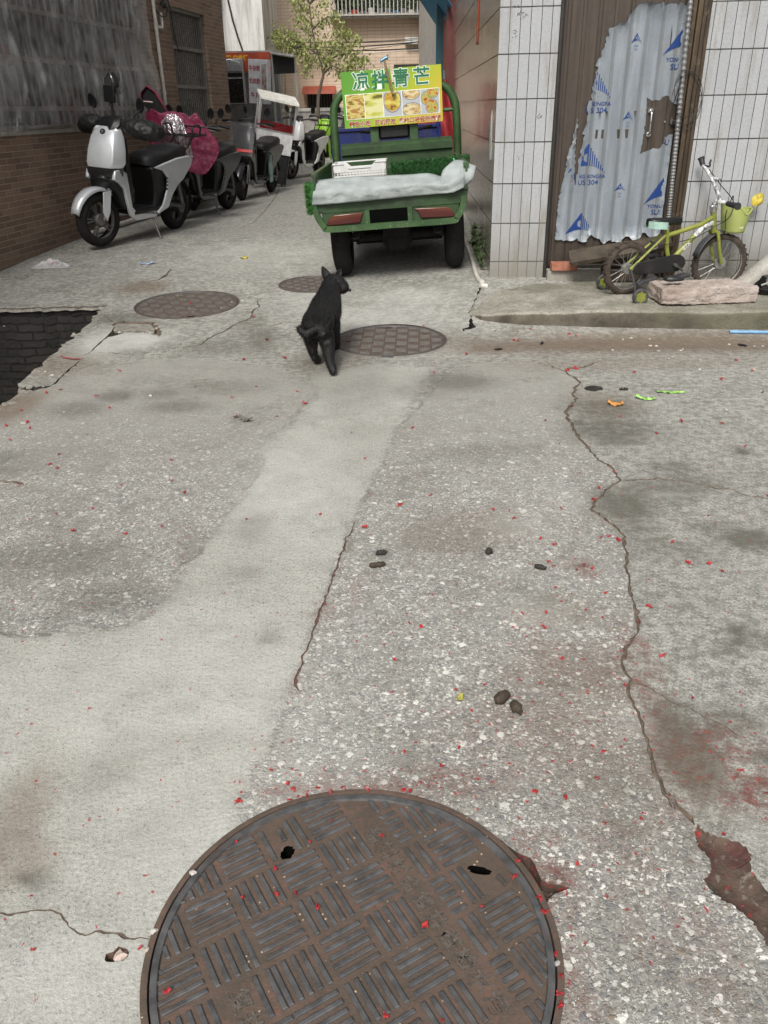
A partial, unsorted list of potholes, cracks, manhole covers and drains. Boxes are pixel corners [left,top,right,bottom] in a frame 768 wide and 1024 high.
pothole [501,840,569,902]
pothole [695,824,768,946]
crack [0,909,149,940]
crack [541,361,768,825]
crack [168,299,346,349]
crack [294,522,355,691]
manhole cover [278,276,323,293]
manhole cover [133,291,240,319]
manhole cover [339,325,447,358]
manhole cover [139,789,565,1024]
